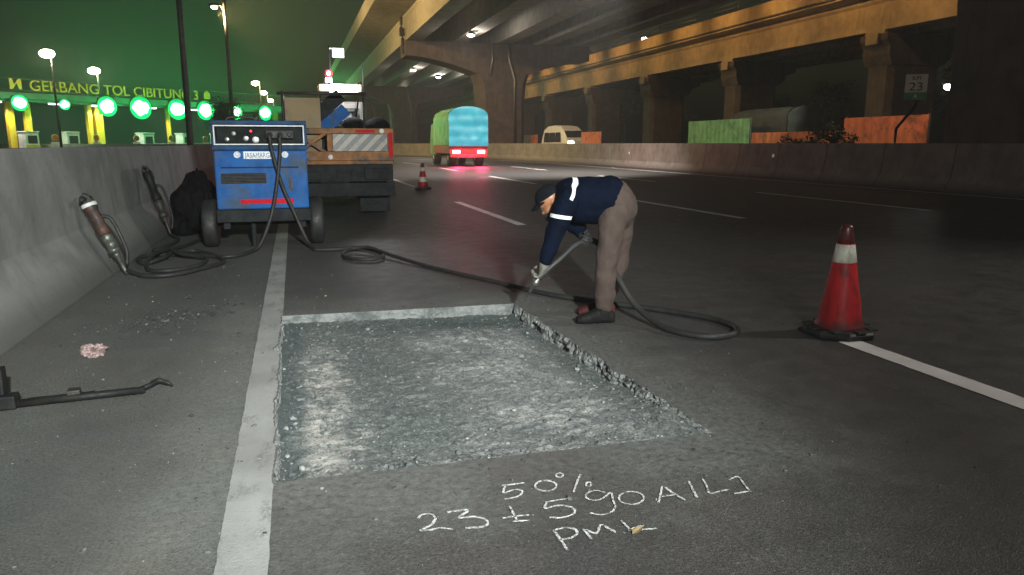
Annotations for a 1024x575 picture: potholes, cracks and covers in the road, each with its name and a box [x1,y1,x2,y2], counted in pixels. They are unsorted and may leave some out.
pothole [273,304,712,483]
